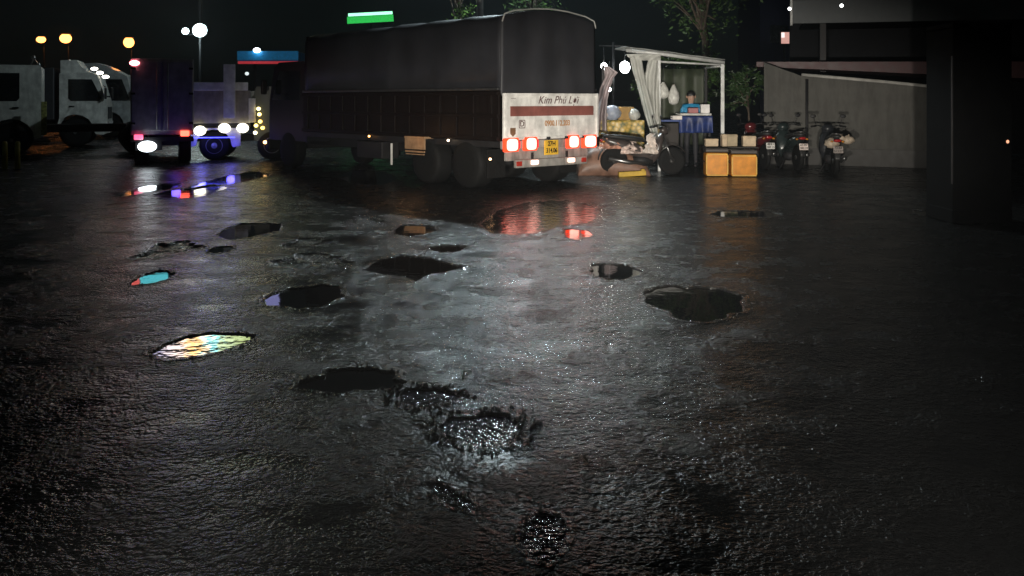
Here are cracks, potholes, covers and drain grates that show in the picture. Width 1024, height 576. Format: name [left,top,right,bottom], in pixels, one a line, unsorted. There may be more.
pothole [512,508,577,569]
pothole [636,282,755,324]
pothole [125,240,211,260]
pothole [420,476,481,516]
pothole [586,261,647,281]
pothole [420,405,546,457]
pothole [352,253,475,283]
pothole [280,362,412,396]
pothole [142,329,264,362]
pothole [126,268,179,286]
pothole [257,282,351,311]
